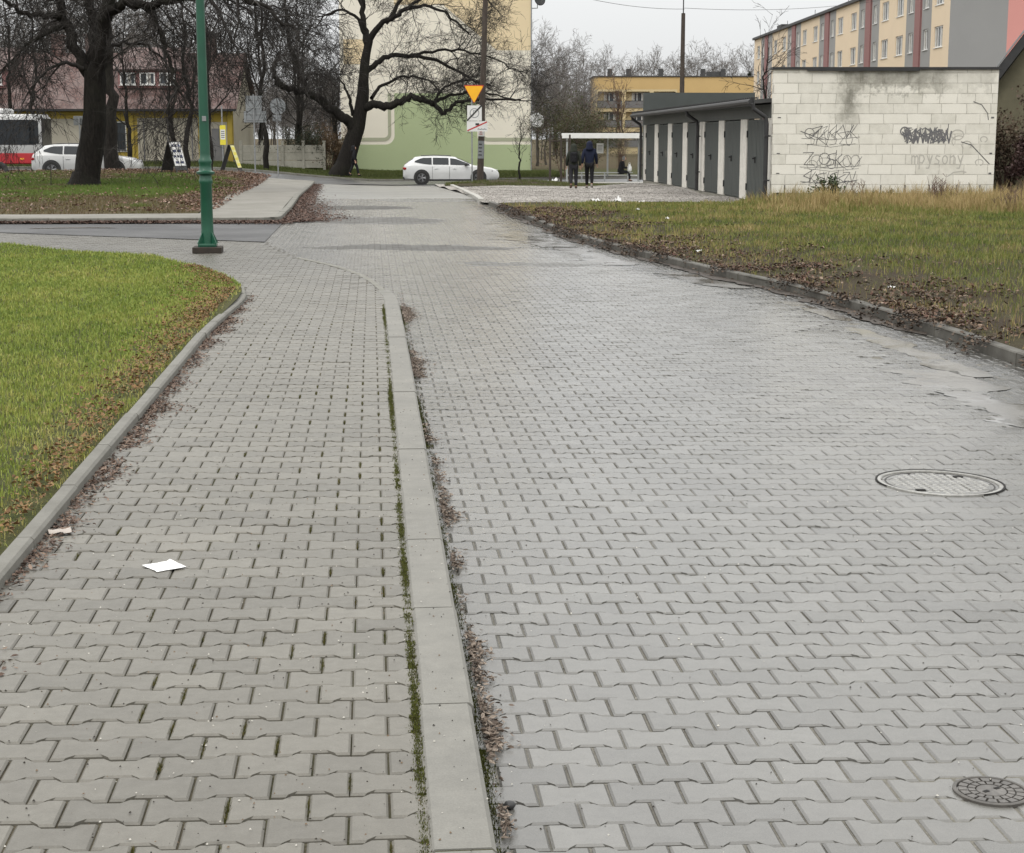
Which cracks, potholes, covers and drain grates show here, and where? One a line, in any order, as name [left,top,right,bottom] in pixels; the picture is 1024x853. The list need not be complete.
utility cover [952,776,1024,808]
manhole cover [875,469,1006,497]
